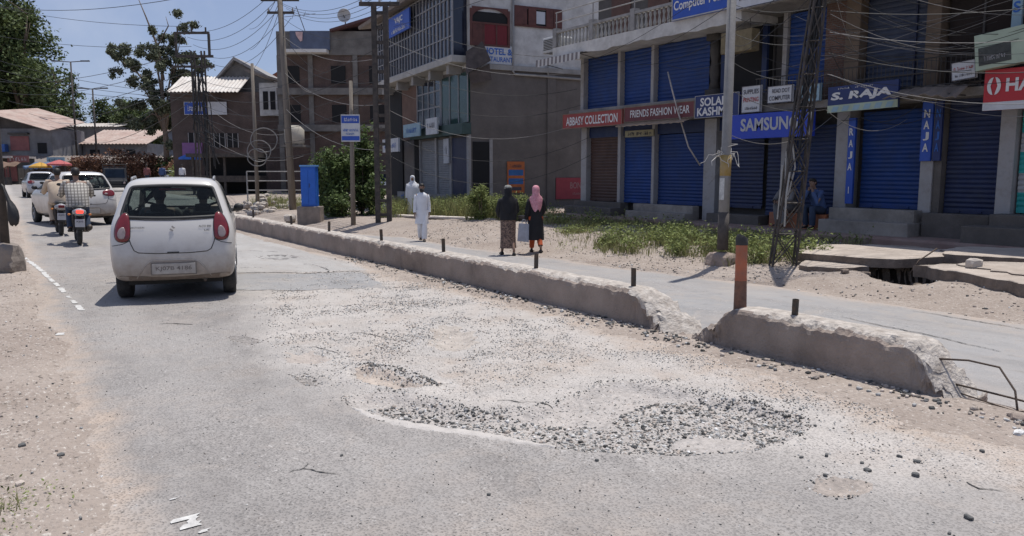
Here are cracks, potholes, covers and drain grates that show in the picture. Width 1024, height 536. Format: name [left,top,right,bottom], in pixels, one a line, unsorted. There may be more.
pothole [341,378,812,456]
pothole [351,362,441,389]
pothole [288,372,322,386]
